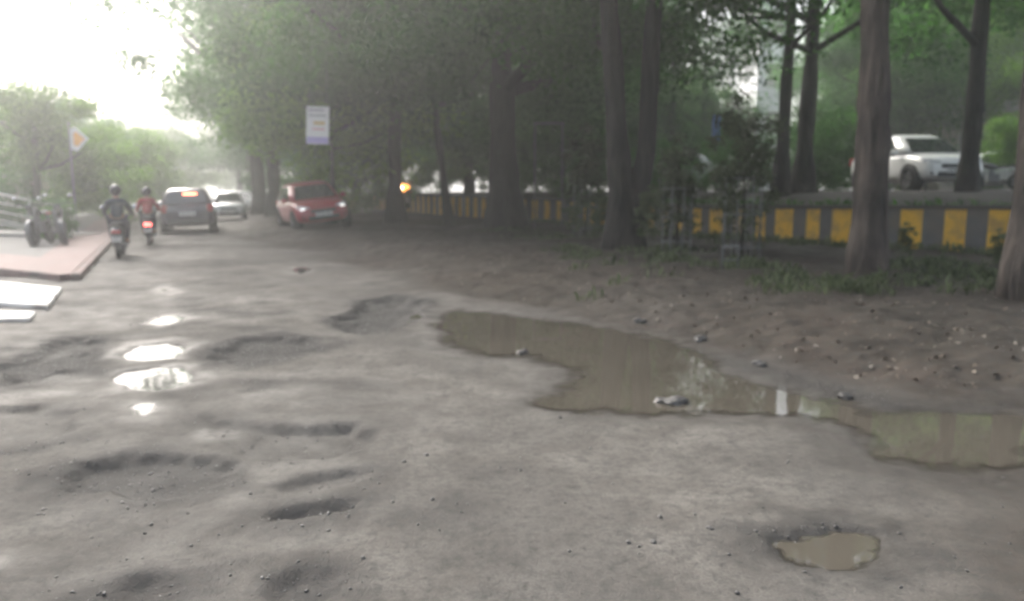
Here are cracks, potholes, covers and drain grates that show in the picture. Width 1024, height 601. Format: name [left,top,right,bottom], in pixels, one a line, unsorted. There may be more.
pothole [20,445,257,507]
pothole [186,330,347,370]
pothole [108,339,200,364]
pothole [187,413,401,468]
pothole [319,294,438,336]
pothole [99,362,213,394]
pothole [229,491,378,527]
pothole [404,304,1024,494]
pothole [730,504,934,583]
